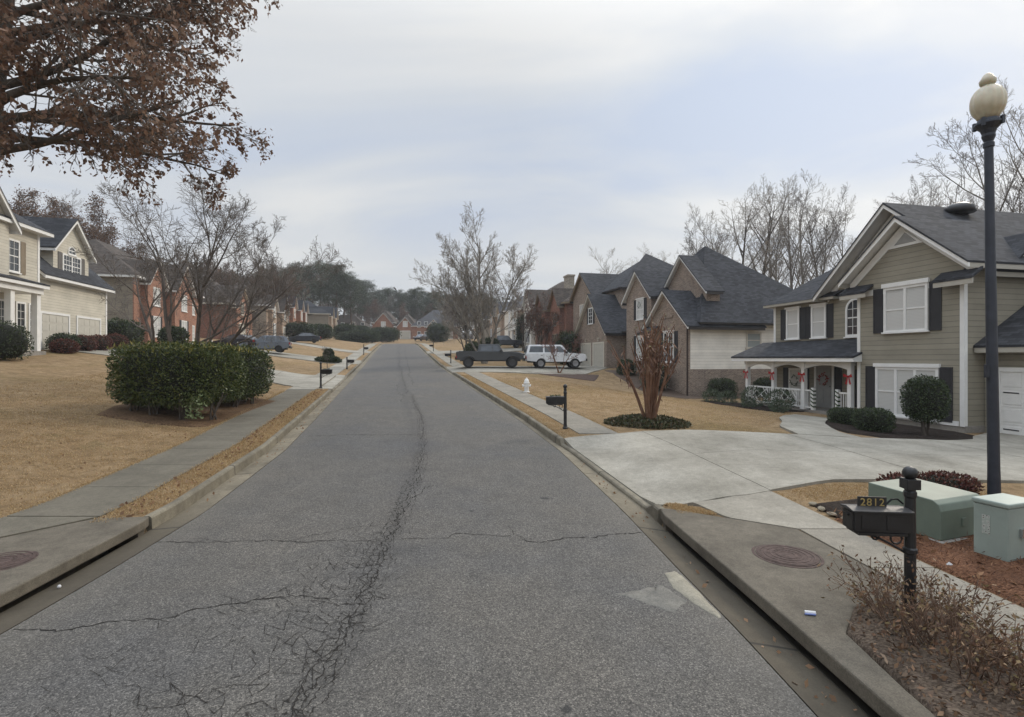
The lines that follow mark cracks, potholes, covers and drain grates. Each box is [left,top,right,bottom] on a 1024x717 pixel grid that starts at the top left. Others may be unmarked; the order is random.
crack [401,528,640,542]
drain grate [0,517,149,613]
manhole cover [0,551,39,571]
crack [35,397,433,717]
manhole cover [751,544,824,569]
